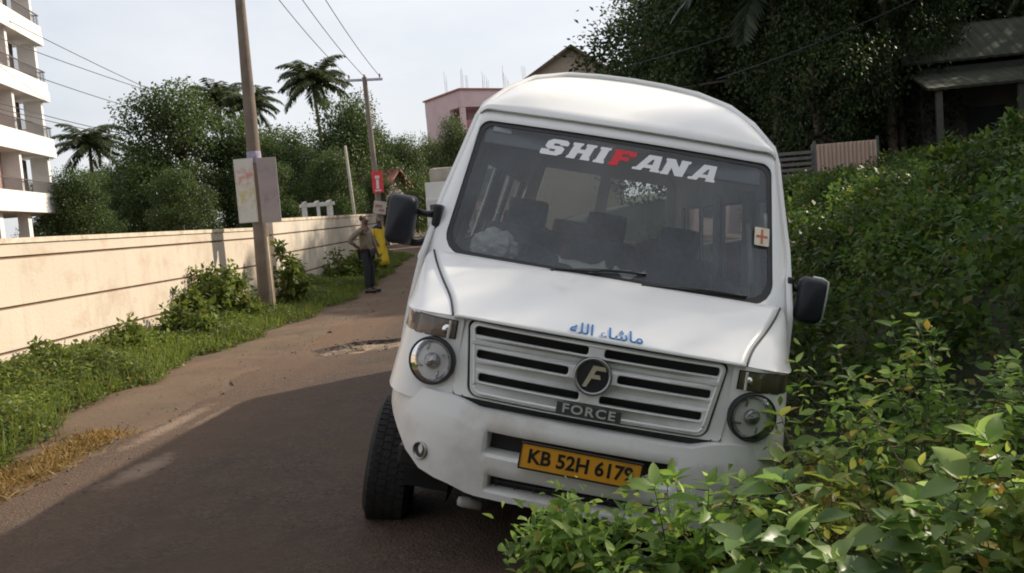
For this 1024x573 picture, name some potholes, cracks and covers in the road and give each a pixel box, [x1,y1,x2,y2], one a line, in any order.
pothole [292,336,401,357]
